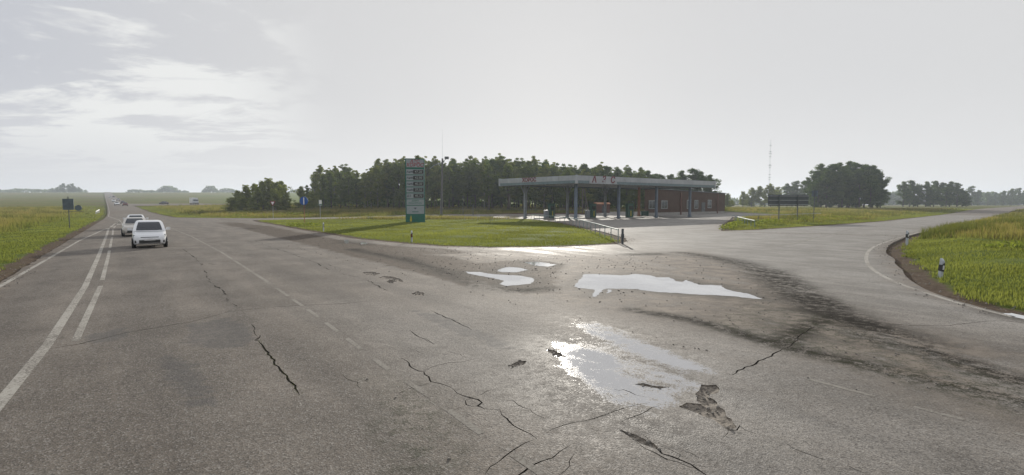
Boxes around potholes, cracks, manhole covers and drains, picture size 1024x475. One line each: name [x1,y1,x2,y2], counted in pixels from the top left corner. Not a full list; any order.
crack [400,332,573,475]
crack [259,342,300,395]
crack [733,326,816,375]
crack [637,436,706,475]
pothole [679,385,736,431]
